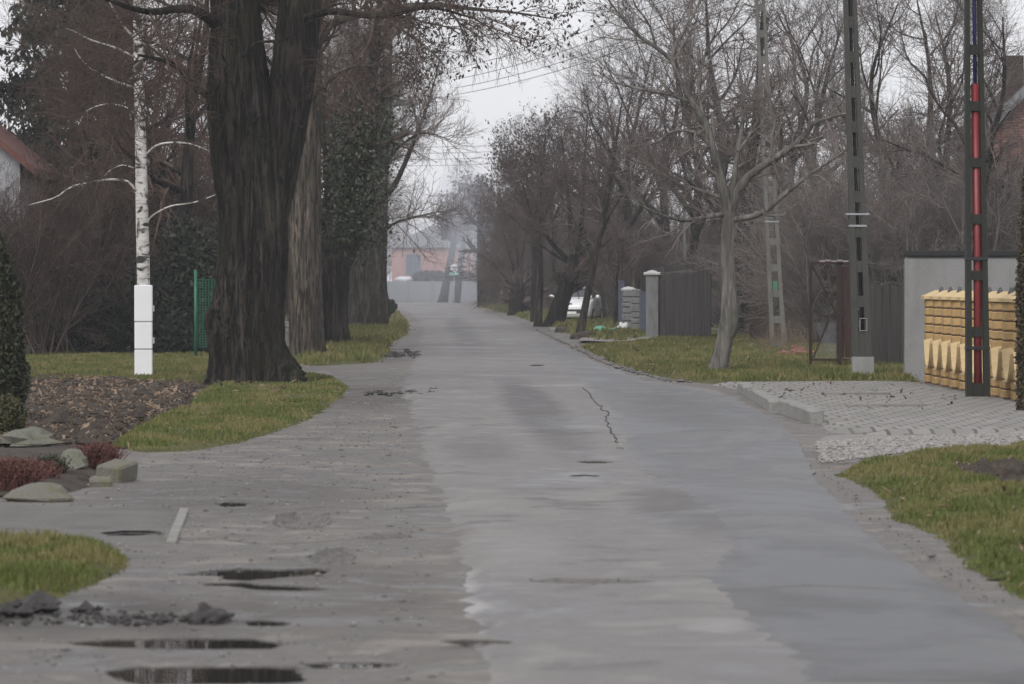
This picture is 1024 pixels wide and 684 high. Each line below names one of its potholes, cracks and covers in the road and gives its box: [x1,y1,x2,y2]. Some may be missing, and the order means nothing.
pothole [177,568,331,581]
crack [582,387,619,443]
pothole [55,635,289,650]
pothole [299,661,402,669]
pothole [95,664,307,684]
